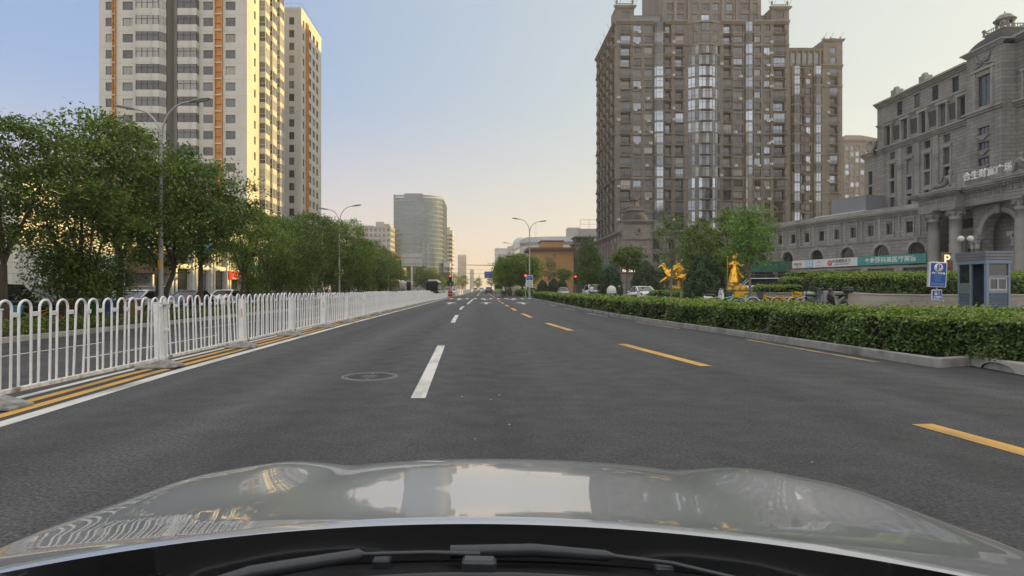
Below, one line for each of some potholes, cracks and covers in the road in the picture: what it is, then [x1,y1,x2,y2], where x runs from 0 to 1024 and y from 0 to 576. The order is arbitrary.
manhole cover [341,372,398,381]
drain grate [968,355,1024,377]
